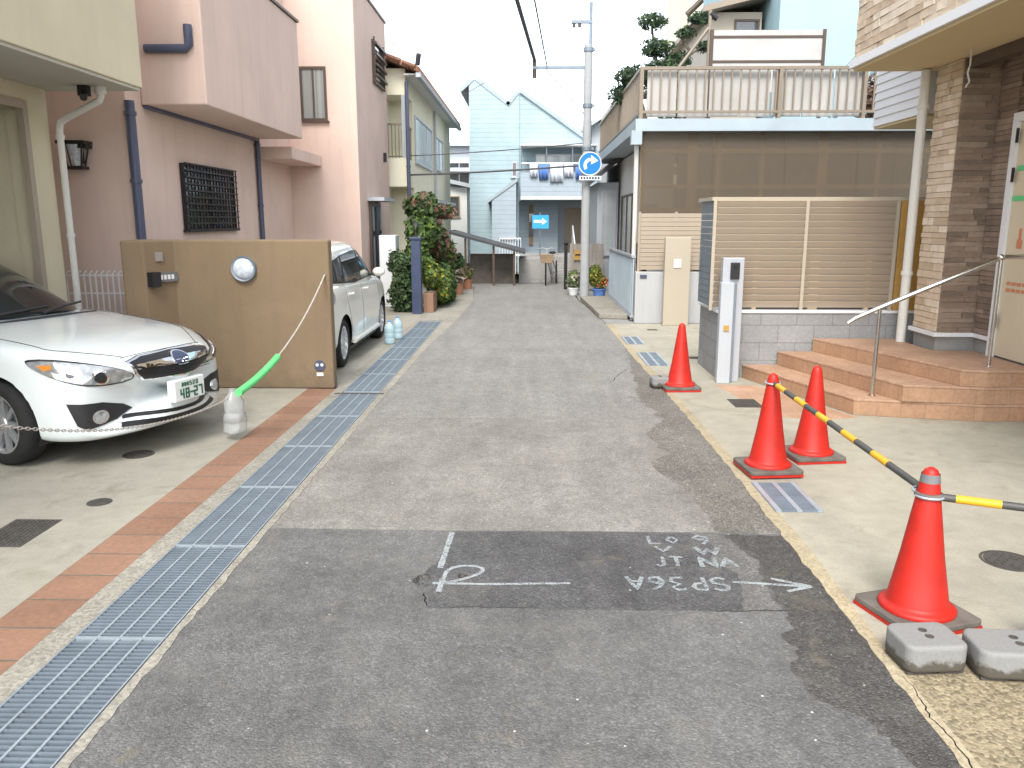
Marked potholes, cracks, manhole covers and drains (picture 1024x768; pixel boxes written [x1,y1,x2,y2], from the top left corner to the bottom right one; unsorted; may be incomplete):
drain grate [751,481,824,513]
manhole cover [122,450,155,459]
drain grate [317,394,378,416]
drain grate [637,352,670,366]
drain grate [240,445,333,488]
drain grate [621,336,645,344]
drain grate [403,329,435,337]
manhole cover [979,550,1024,572]
drain grate [0,637,165,768]
drain grate [363,359,409,374]
drain grate [176,486,297,546]
drain grate [285,416,359,446]
